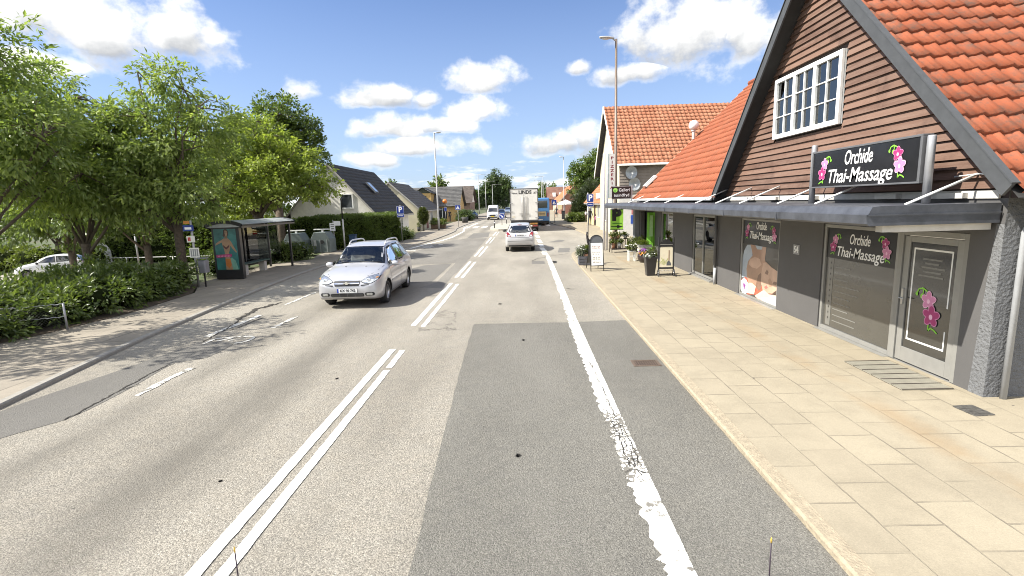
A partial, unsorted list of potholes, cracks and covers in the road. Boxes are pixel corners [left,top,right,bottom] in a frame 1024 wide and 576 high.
crack [203,302,281,342]
drain grate [844,360,954,390]
